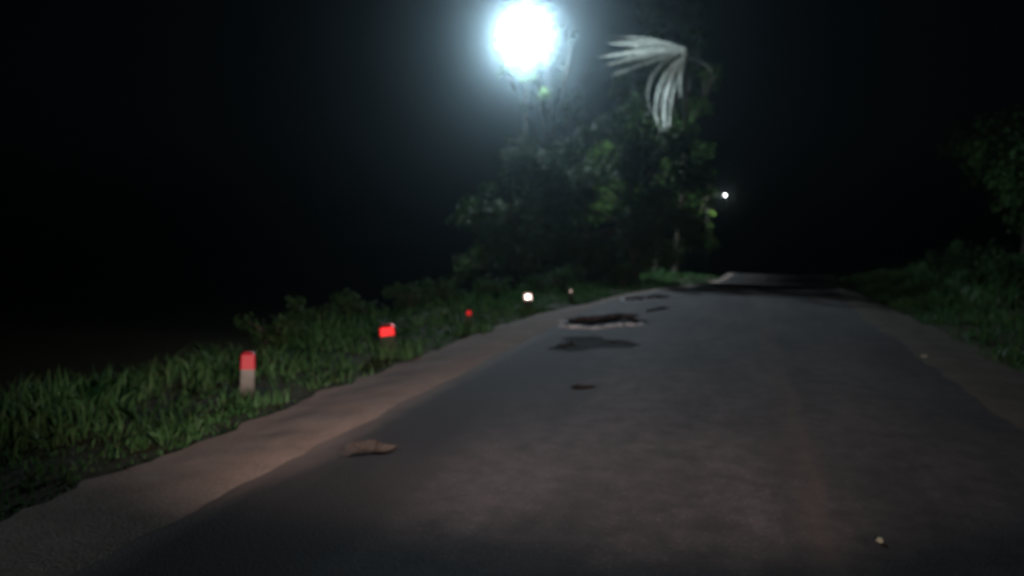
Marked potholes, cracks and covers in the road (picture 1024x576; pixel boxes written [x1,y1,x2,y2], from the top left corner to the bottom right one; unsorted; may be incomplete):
pothole [558,313,653,330]
pothole [542,335,648,353]
